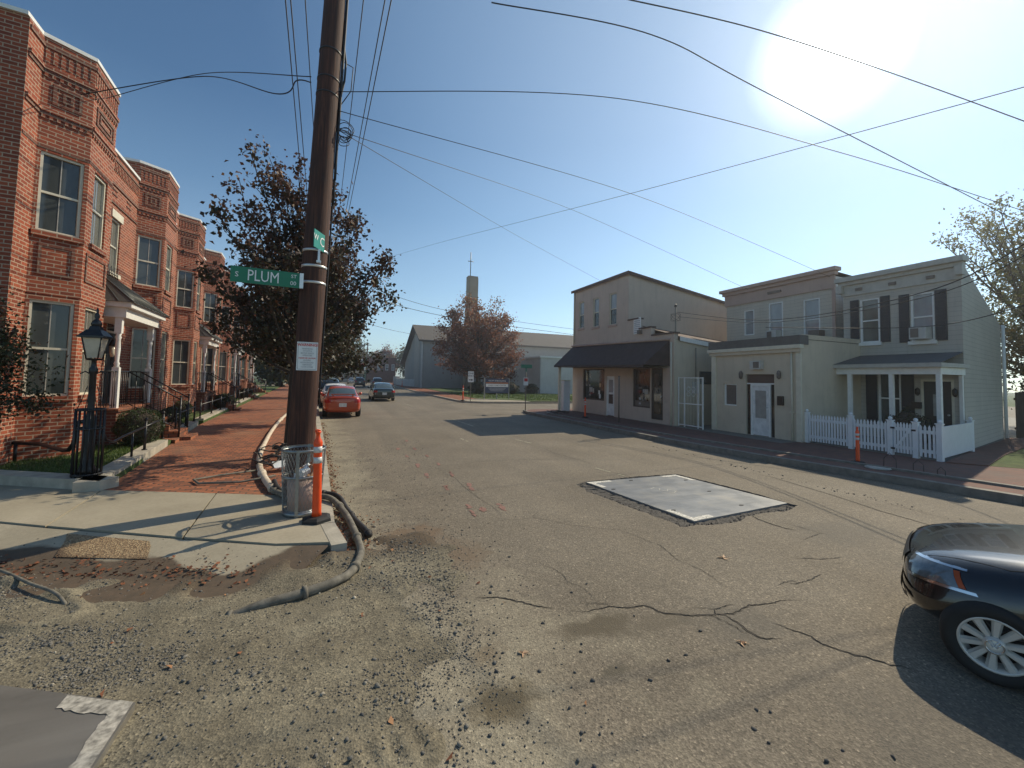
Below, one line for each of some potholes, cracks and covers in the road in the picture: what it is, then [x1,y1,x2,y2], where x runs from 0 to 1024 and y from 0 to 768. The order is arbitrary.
crack [481,557,920,672]
